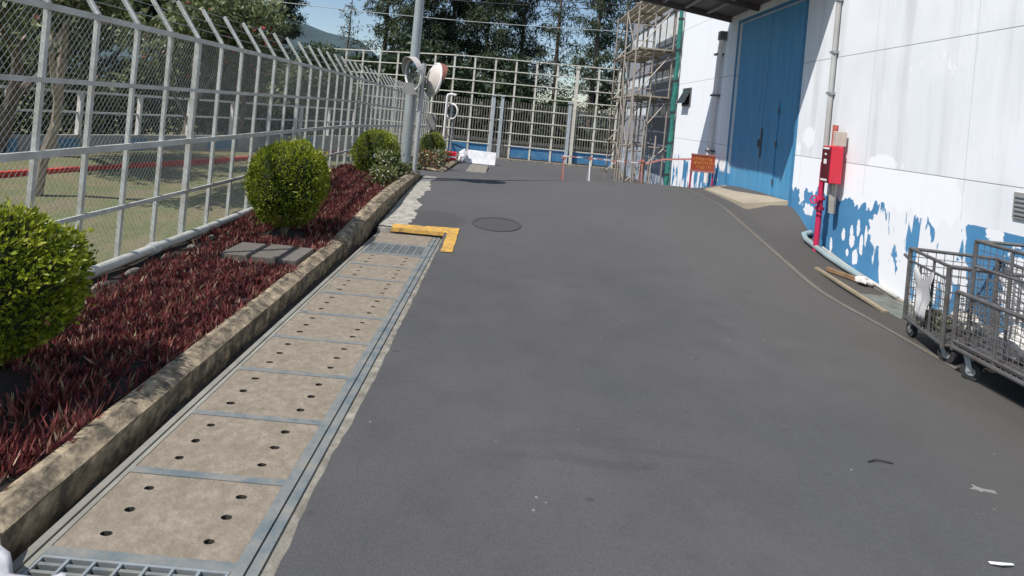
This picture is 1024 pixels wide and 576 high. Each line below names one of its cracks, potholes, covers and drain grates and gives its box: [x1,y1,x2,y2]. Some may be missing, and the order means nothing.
drain grate [21,554,230,576]
manhole cover [472,217,521,232]
drain grate [363,242,427,257]
